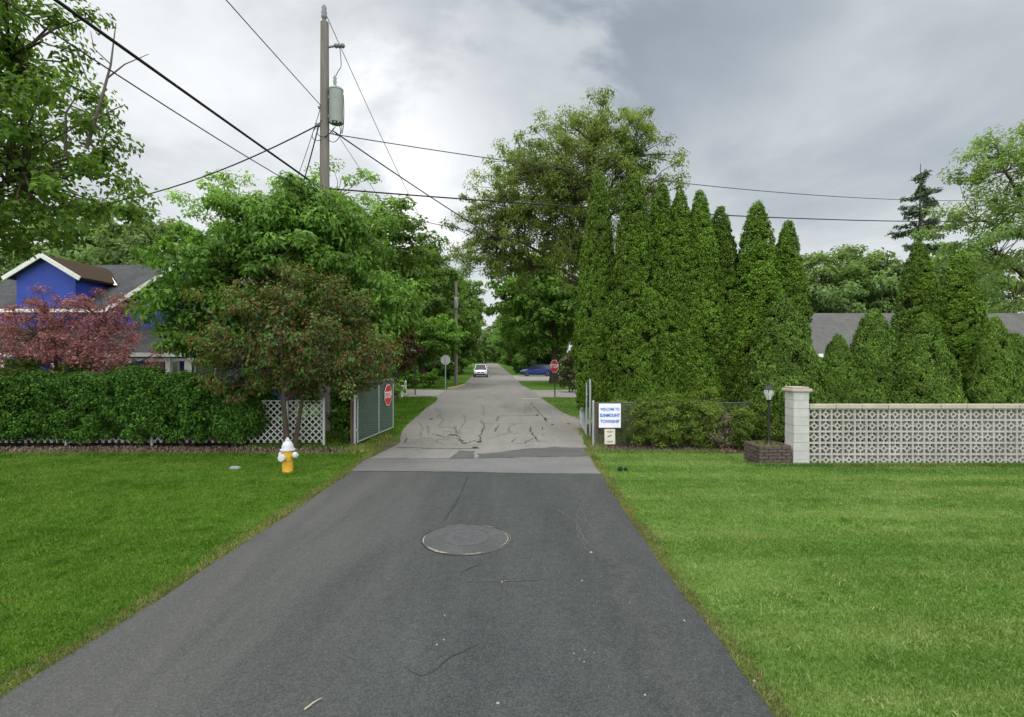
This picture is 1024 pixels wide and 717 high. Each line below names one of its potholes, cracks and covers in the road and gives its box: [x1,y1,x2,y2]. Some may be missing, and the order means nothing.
crack [403,403,547,447]
crack [421,476,541,582]
crack [550,506,634,567]
manhole cover [442,529,490,546]
